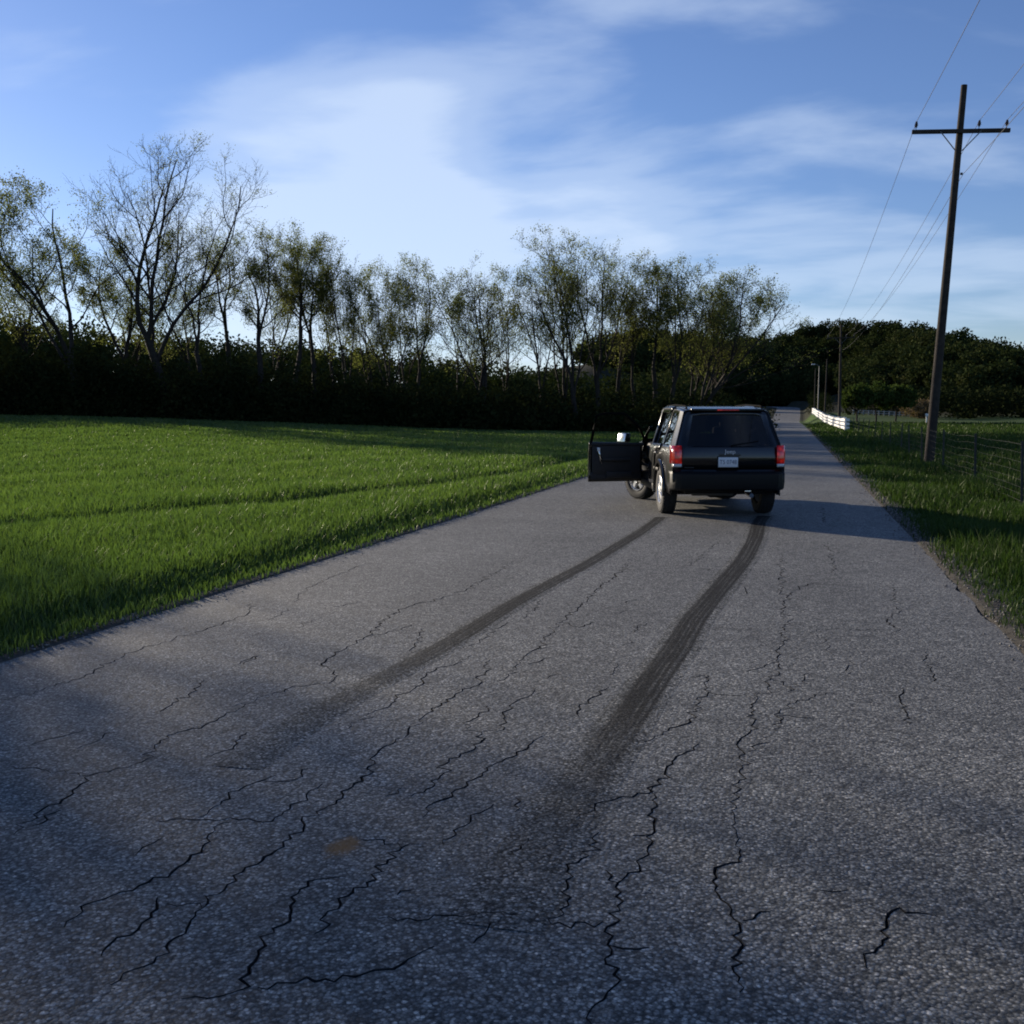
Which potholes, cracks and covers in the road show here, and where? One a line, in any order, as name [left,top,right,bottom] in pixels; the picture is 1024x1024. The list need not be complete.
crack [547,550,844,1024]
crack [13,559,633,999]
crack [863,907,938,968]
crack [898,687,911,723]
crack [810,587,911,674]
